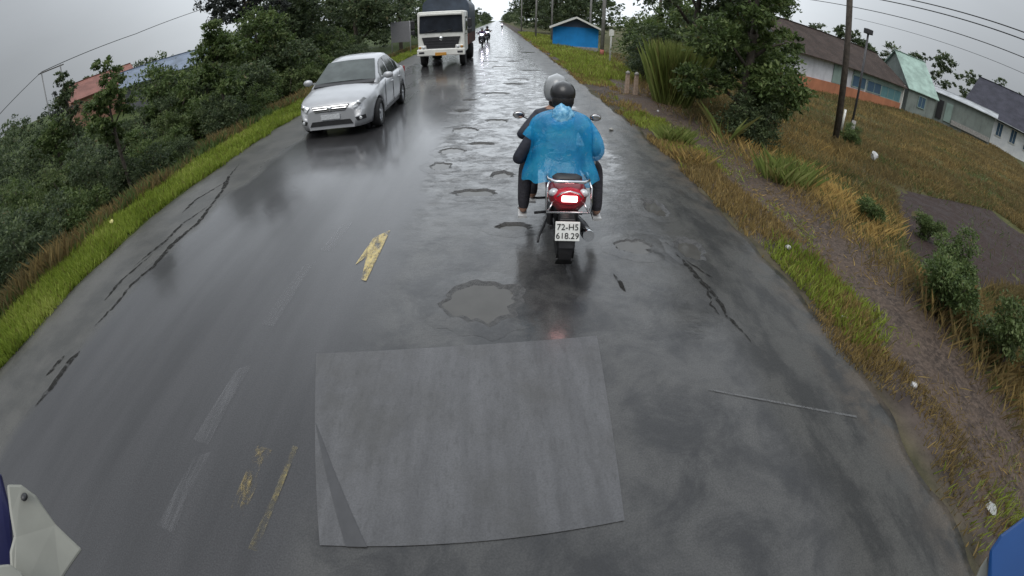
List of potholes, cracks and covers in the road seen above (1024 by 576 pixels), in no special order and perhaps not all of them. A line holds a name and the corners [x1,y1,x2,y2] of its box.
crack [101,169,235,319]
pothole [428,145,477,157]
pothole [437,185,509,202]
pothole [480,217,547,238]
pothole [419,159,462,174]
crack [667,243,751,341]
pothole [416,271,544,342]
pothole [441,124,492,136]
crack [35,351,80,406]
pothole [479,167,519,183]
pothole [456,140,503,148]
pothole [473,117,519,126]
